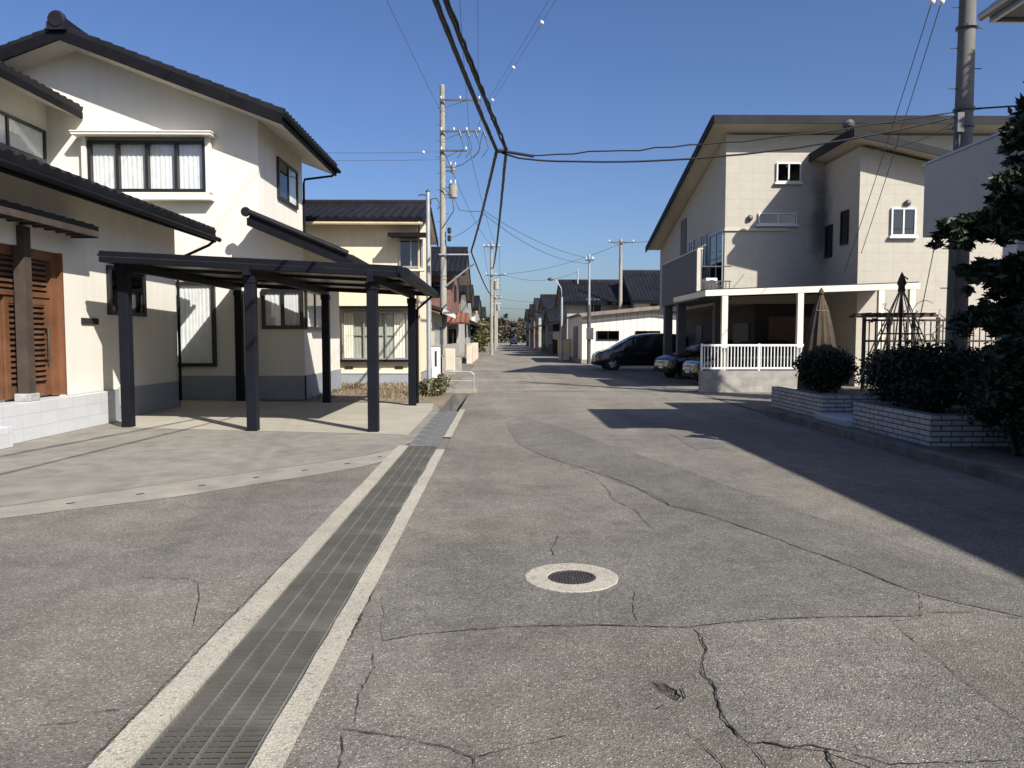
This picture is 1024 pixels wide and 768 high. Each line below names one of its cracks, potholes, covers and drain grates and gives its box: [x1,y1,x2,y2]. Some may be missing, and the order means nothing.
drain grate [357,485,414,507]
drain grate [168,630,328,737]
pothole [649,681,681,701]
drain grate [389,456,431,470]
drain grate [250,573,362,633]
drain grate [299,534,385,574]
crack [39,555,291,768]
manhole cover [525,563,619,593]
drain grate [131,725,272,768]
drain grate [400,446,438,457]
drain grate [333,506,402,536]
crack [338,442,1024,768]
